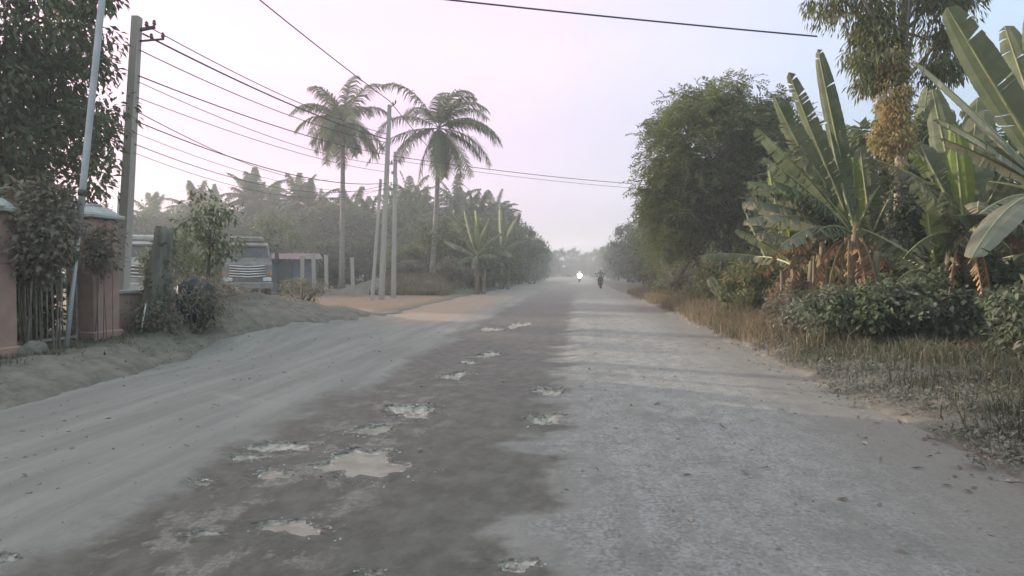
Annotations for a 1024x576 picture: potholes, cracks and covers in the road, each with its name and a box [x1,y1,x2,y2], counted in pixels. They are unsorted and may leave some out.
pothole [502,322,536,331]
pothole [467,350,509,360]
pothole [514,409,577,429]
pothole [239,465,314,484]
pothole [376,401,447,422]
pothole [223,439,331,454]
pothole [283,441,436,488]
pothole [430,370,476,382]
pothole [517,386,572,398]
pothole [333,422,405,439]
pothole [0,546,46,570]
